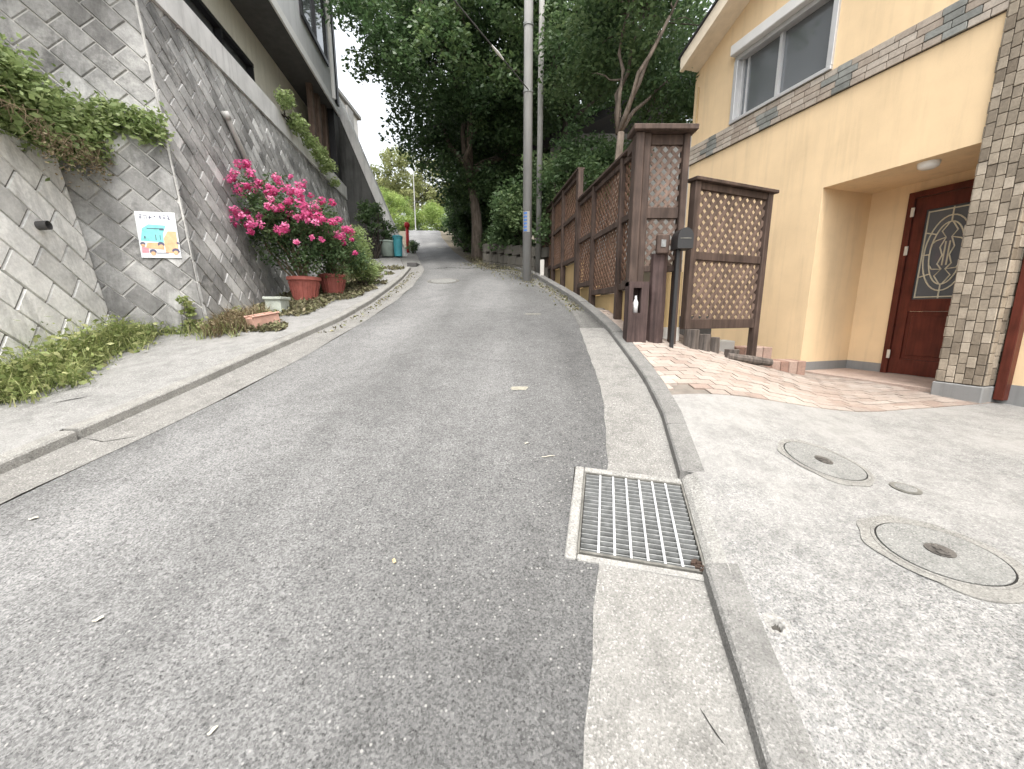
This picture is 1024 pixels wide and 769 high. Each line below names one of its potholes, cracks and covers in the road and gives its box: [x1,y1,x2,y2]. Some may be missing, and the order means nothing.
drain grate [564,466,731,582]
manhole cover [777,439,875,487]
manhole cover [889,482,923,495]
manhole cover [857,515,1024,604]
